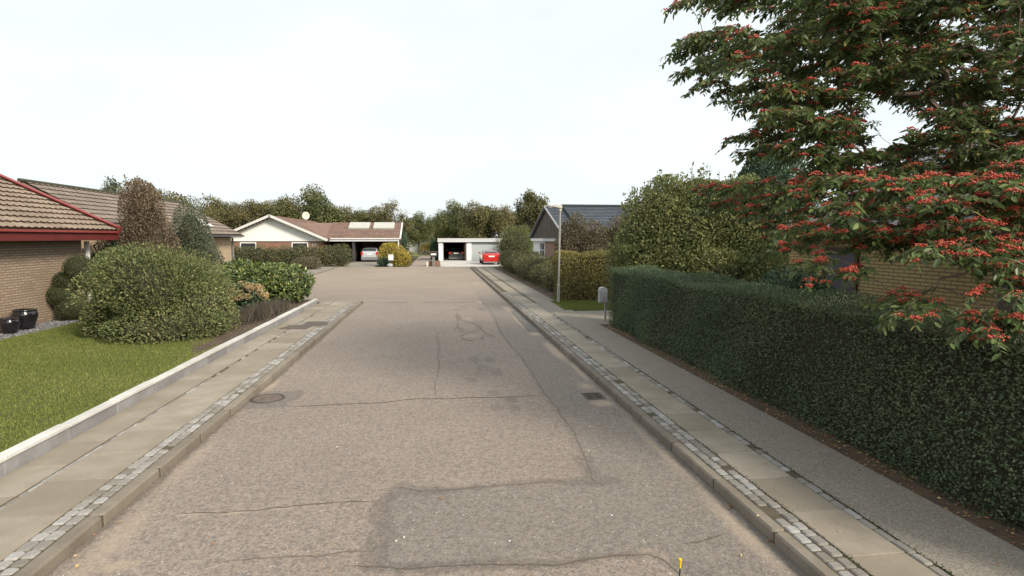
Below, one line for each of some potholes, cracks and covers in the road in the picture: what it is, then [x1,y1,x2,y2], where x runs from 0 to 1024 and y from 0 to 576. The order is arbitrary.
crack [311,296,595,481]
crack [177,500,370,514]
drain grate [581,392,606,400]
manhole cover [250,393,285,403]
